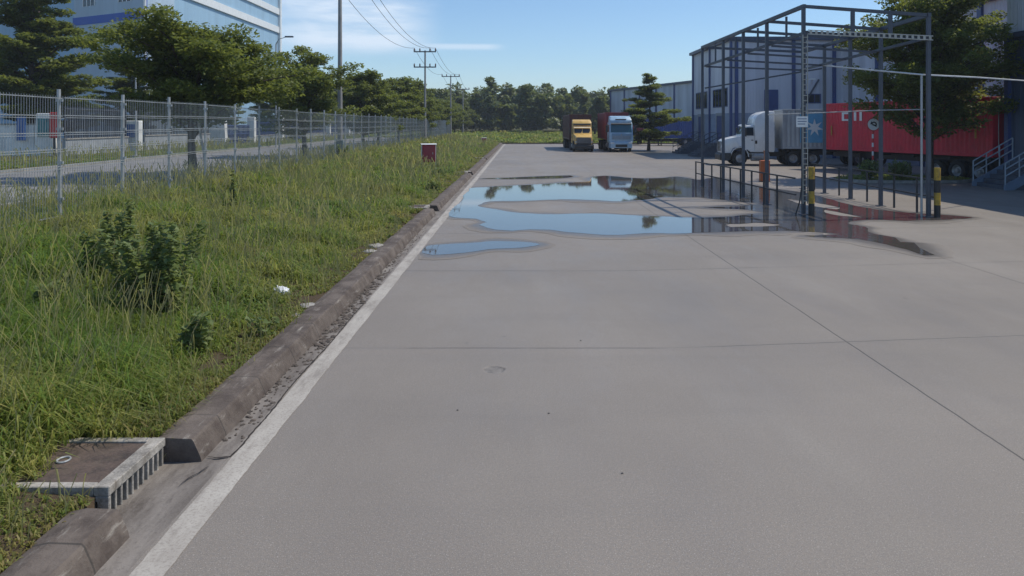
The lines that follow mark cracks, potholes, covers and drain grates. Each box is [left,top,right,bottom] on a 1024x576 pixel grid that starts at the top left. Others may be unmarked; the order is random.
drain grate [0,437,165,509]
